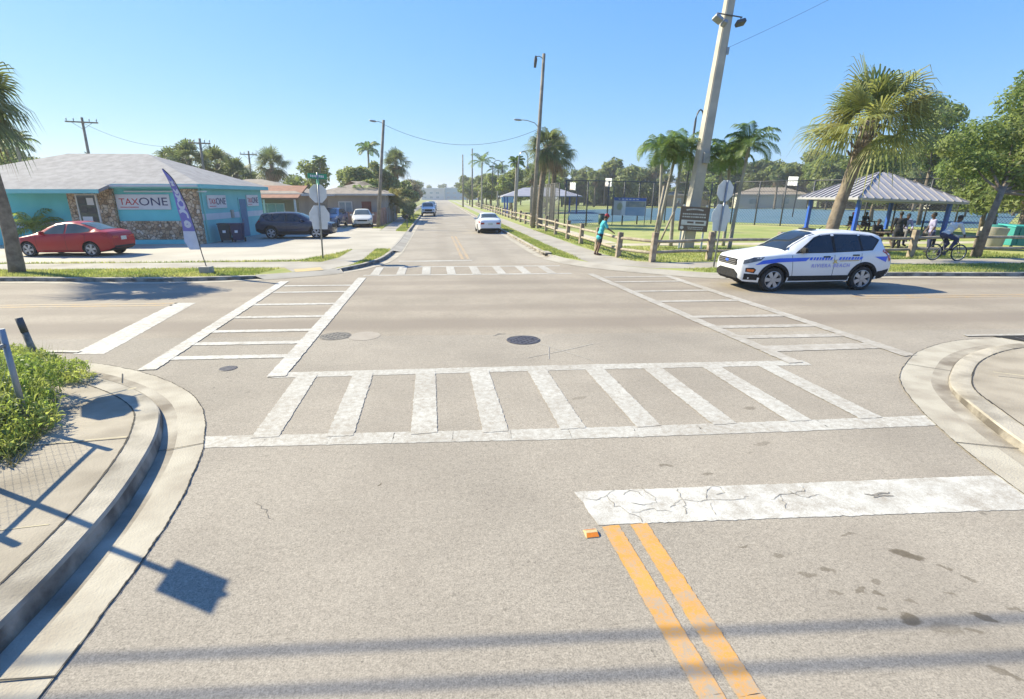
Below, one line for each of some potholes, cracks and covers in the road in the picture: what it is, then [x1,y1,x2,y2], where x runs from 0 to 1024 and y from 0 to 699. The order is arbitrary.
manhole cover [319,332,351,340]
manhole cover [507,335,540,344]
crack [586,486,745,521]
